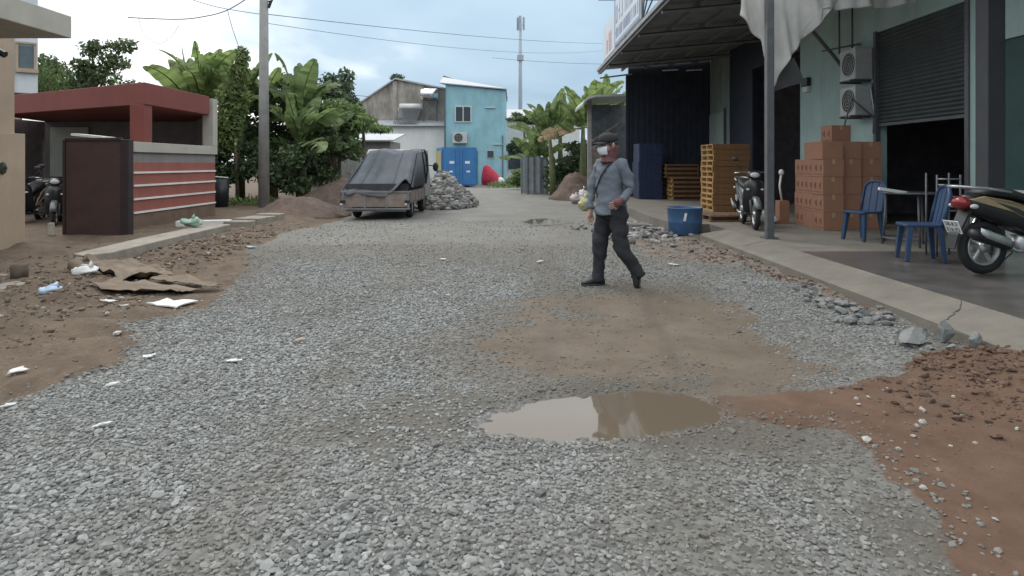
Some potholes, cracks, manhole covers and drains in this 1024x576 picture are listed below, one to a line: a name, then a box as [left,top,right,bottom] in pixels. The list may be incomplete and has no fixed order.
pothole [518,218,571,226]
pothole [470,387,727,444]
